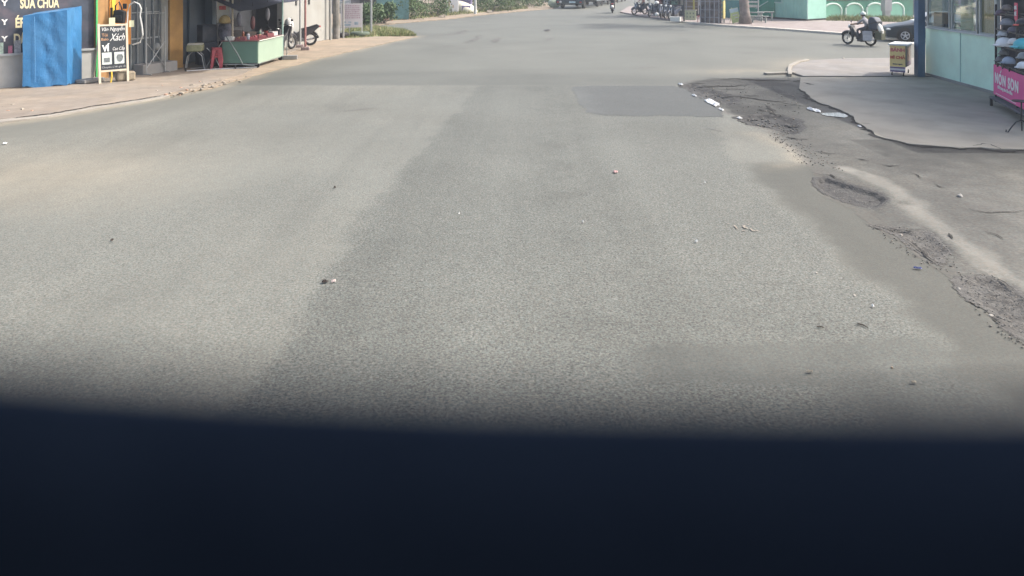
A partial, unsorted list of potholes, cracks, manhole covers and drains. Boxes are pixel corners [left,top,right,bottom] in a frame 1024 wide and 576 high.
crack [872,223,936,262]
pothole [732,114,807,135]
pothole [811,176,889,209]
